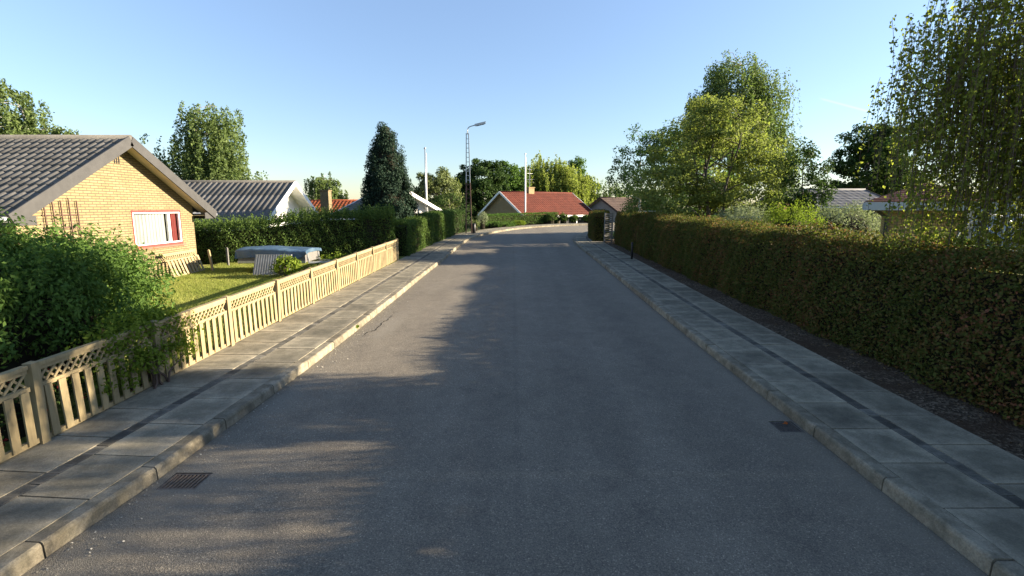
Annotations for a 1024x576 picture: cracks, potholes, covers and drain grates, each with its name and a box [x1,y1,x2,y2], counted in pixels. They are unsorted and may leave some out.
drain grate [157,473,212,489]
drain grate [769,422,804,432]
